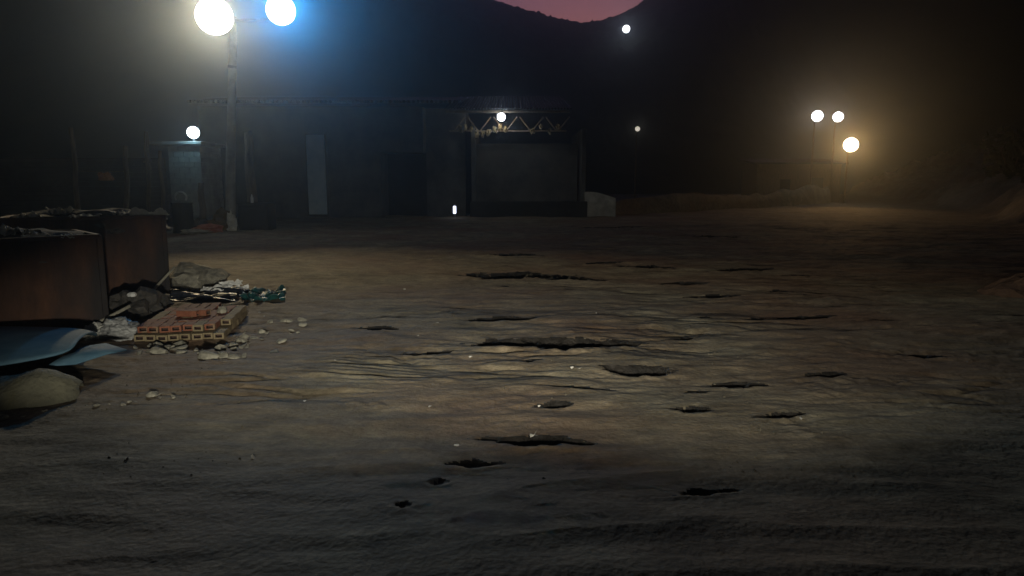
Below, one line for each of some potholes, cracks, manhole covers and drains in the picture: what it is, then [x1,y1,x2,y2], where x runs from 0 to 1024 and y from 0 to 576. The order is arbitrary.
pothole [460,337,650,351]
pothole [670,405,715,413]
pothole [444,458,506,468]
pothole [534,400,574,409]
pothole [467,435,598,446]
pothole [598,364,679,377]
pothole [672,488,744,496]
pothole [457,271,592,281]
